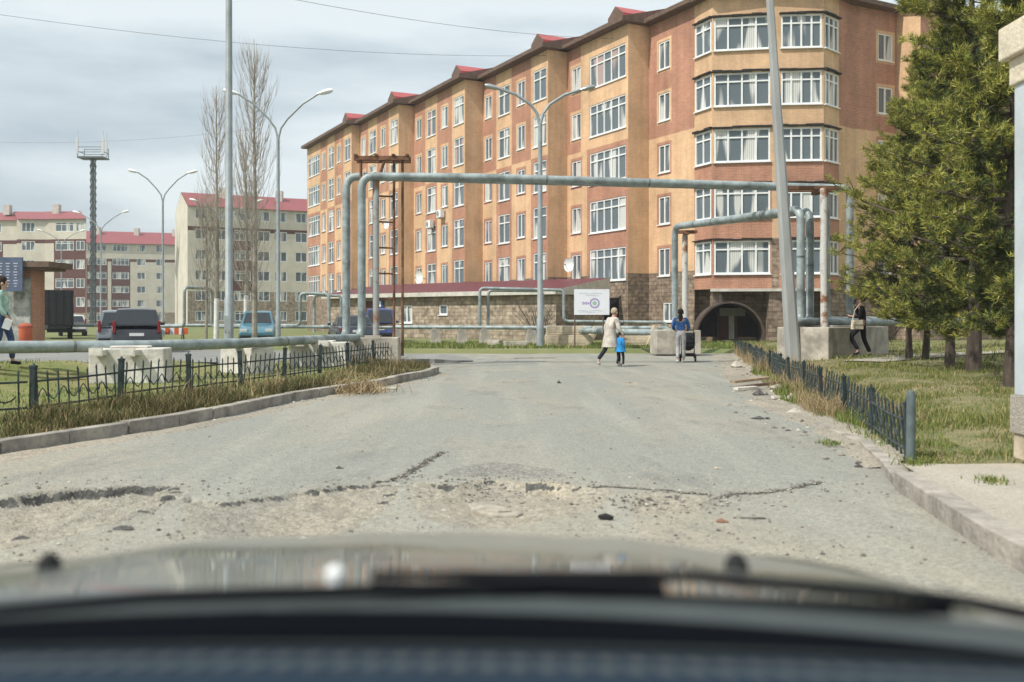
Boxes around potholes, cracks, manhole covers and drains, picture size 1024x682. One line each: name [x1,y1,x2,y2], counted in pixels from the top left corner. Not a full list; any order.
pothole [409,479,615,528]
crack [376,452,444,484]
crack [587,481,823,499]
pothole [0,485,184,550]
